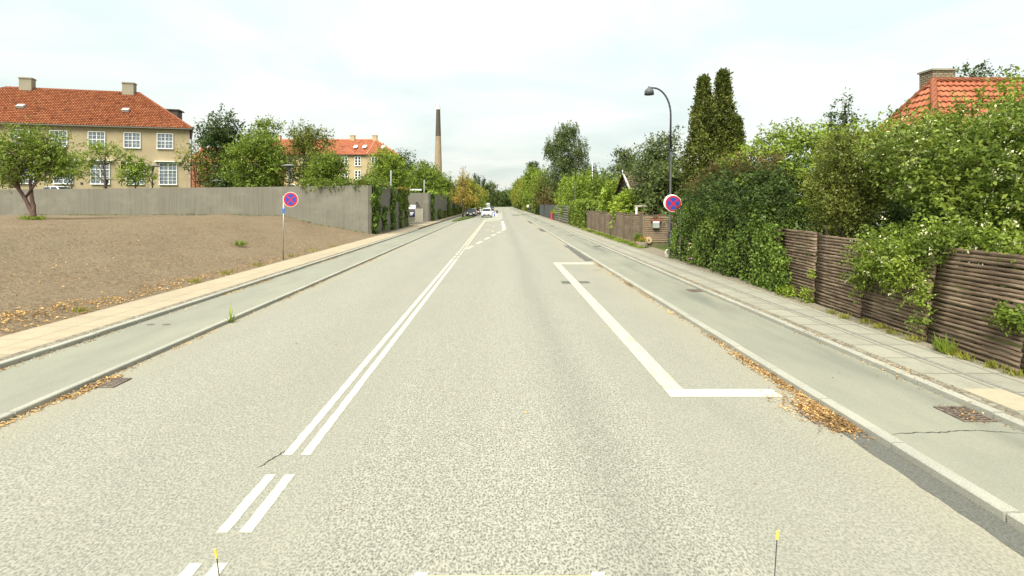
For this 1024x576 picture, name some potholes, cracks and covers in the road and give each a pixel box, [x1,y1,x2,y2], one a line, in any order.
drain grate [933,406,998,422]
drain grate [86,378,132,388]
